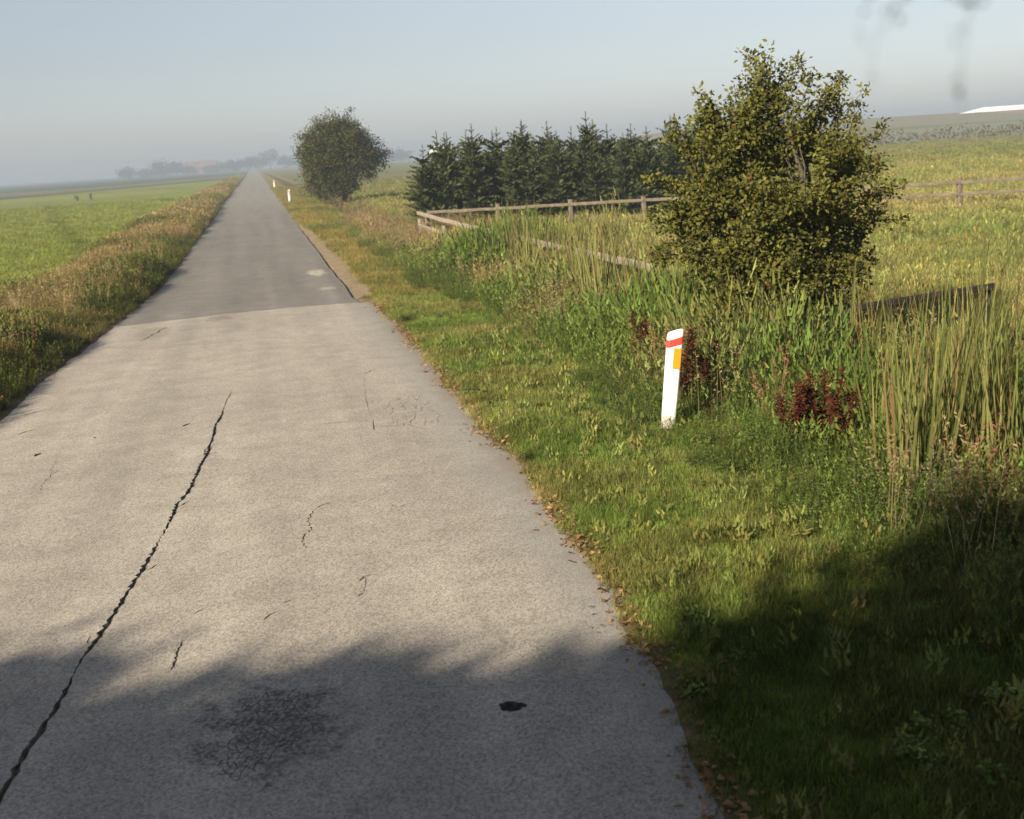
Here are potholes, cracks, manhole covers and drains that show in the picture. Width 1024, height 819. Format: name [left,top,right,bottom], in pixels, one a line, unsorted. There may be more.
crack [0,393,232,805]
crack [294,500,406,548]
pothole [499,701,527,712]
crack [320,369,442,430]
